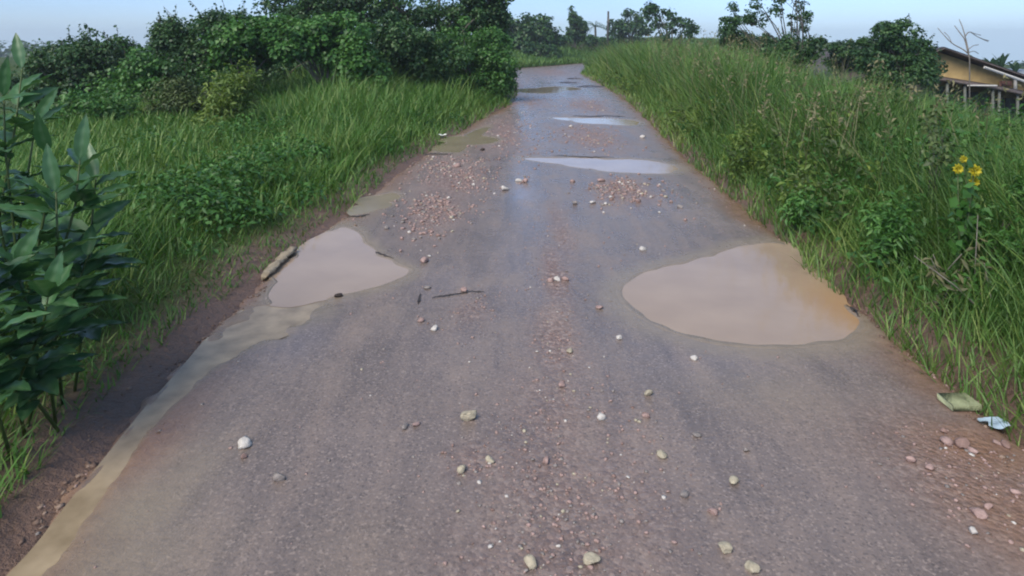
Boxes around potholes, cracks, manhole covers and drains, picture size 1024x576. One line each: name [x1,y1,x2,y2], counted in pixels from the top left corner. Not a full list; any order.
pothole [265,225,415,308]
pothole [616,241,868,349]
pothole [432,126,500,153]
pothole [521,157,682,174]
pothole [550,117,642,126]
pothole [514,86,583,94]
pothole [346,192,402,216]
